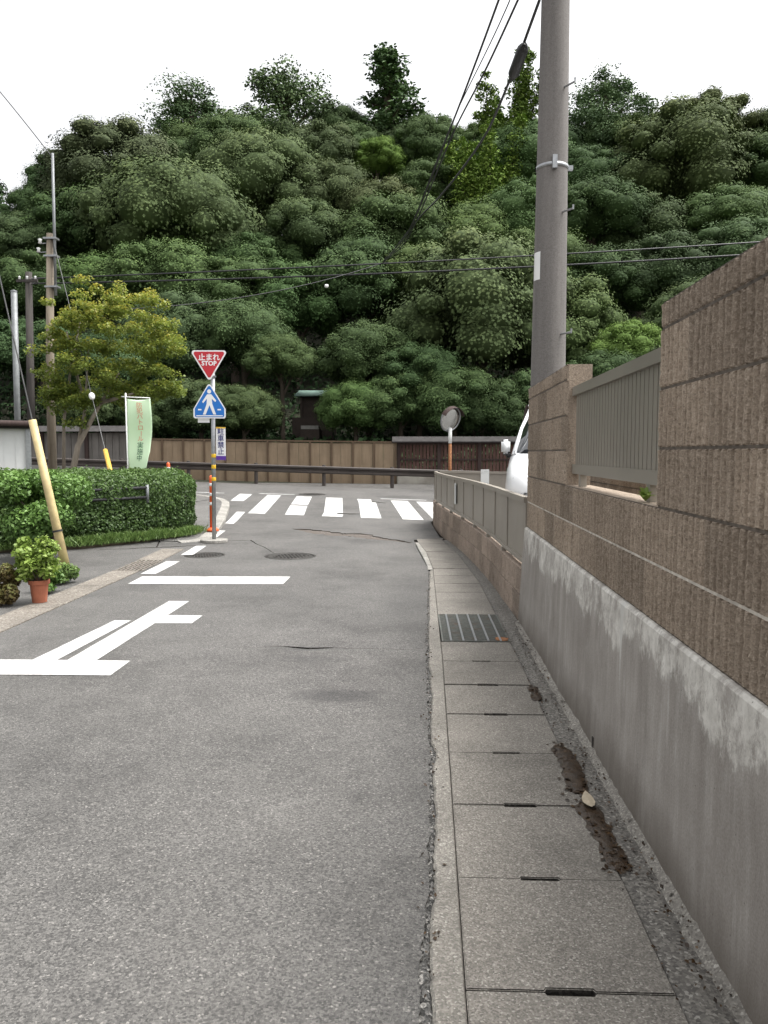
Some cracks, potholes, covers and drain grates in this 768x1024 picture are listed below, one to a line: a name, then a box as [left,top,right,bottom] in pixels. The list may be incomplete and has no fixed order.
drain grate [438,614,511,642]
manhole cover [264,552,316,560]
